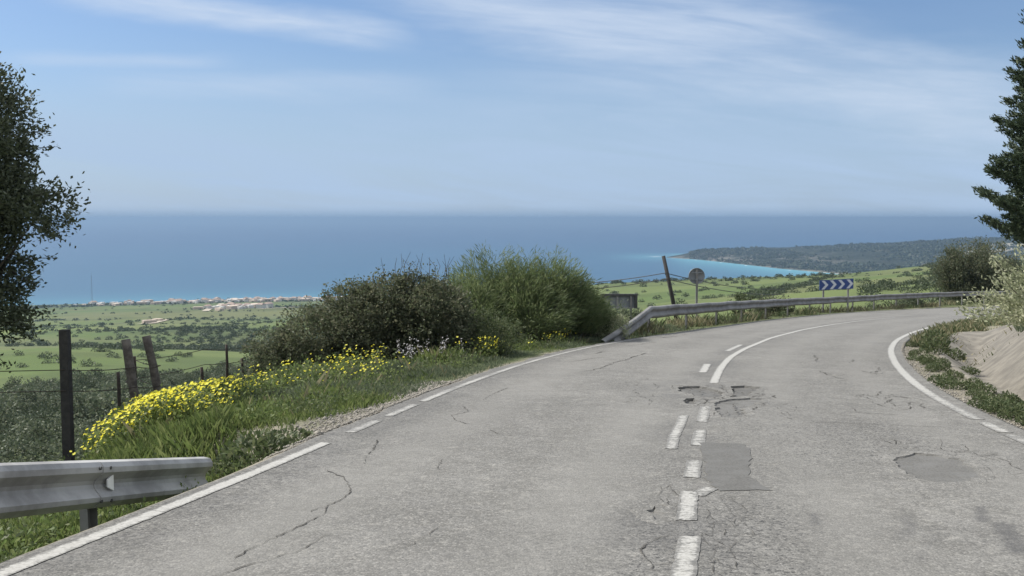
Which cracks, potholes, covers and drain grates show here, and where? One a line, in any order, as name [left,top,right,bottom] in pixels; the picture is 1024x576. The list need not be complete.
pothole [721,385,769,398]
pothole [670,386,736,399]
crack [814,355,1020,475]
crack [701,496,757,575]
crack [639,534,672,570]
crack [215,470,351,576]
pothole [705,397,776,420]
